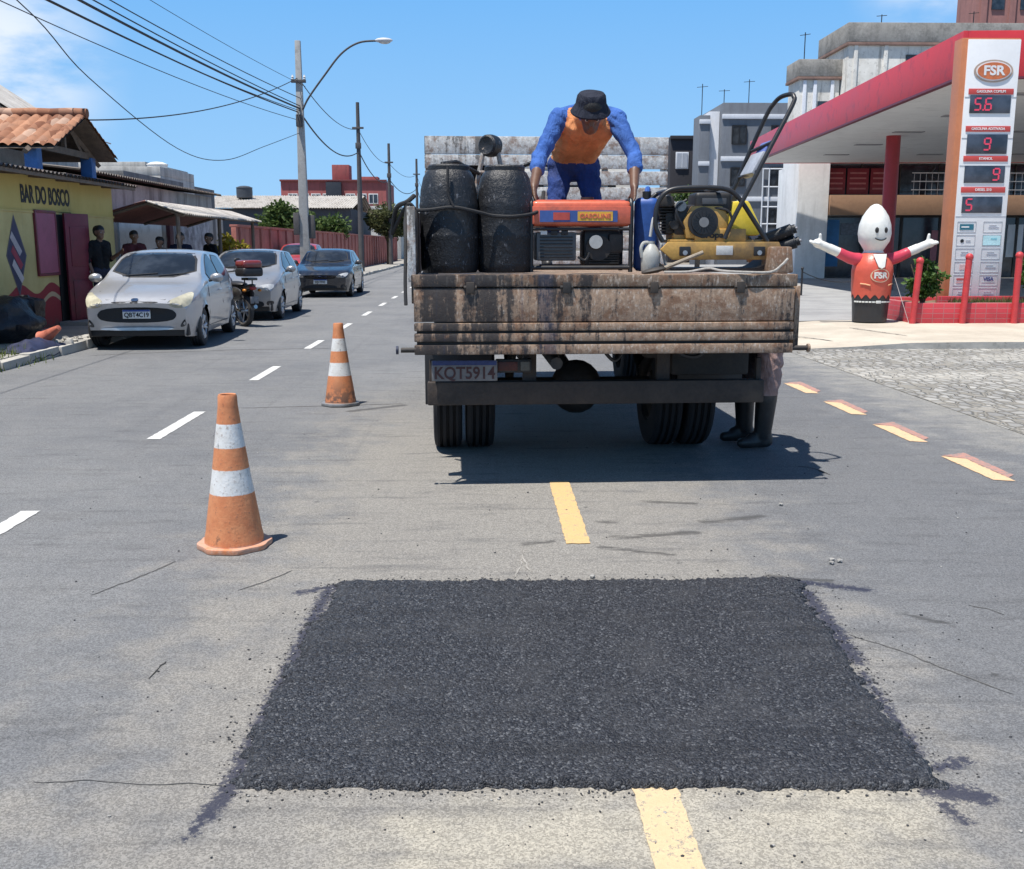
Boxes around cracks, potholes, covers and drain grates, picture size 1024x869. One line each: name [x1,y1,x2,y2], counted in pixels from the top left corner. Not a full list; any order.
crack [92,561,175,595]
crack [849,634,1012,694]
